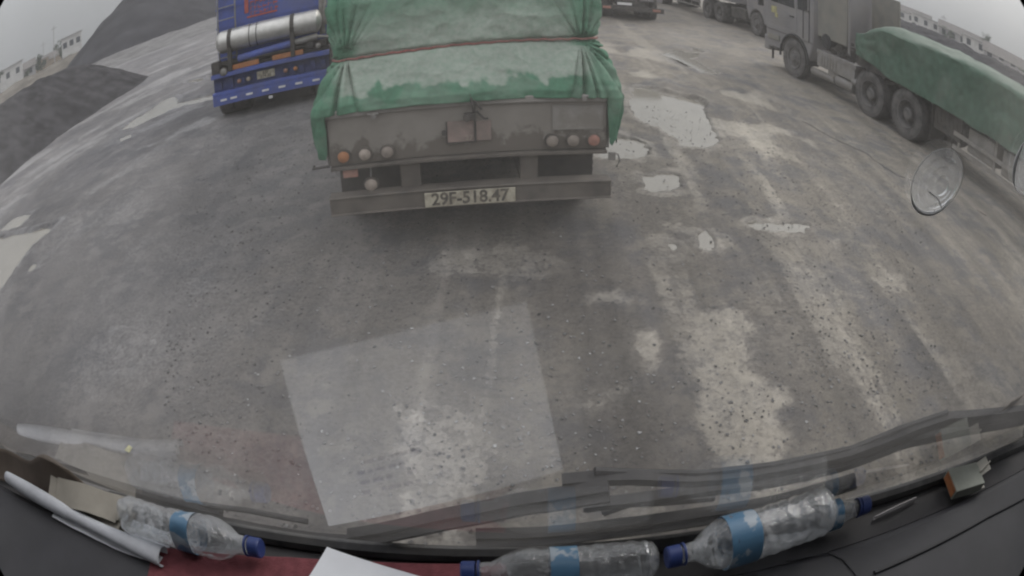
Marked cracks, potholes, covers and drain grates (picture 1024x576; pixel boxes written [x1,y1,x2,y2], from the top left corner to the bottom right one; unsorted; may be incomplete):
pothole [733,215,823,239]
pothole [627,169,693,198]
crack [804,122,916,183]
pothole [622,84,731,153]
pothole [593,130,664,164]
